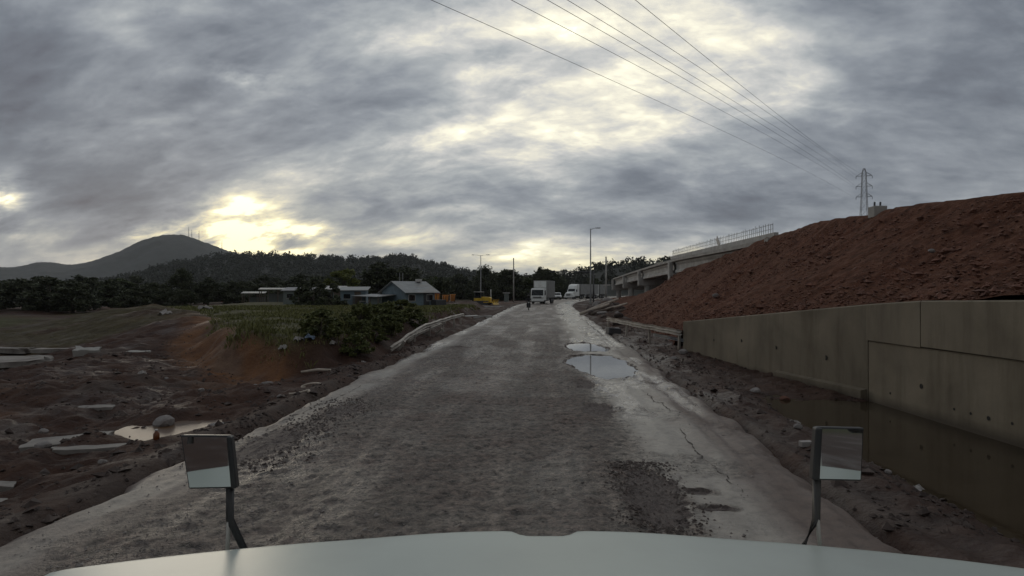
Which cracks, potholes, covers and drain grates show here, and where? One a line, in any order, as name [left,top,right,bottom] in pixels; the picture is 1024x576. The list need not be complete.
pothole [697,504,735,512]
pothole [564,342,610,352]
pothole [562,354,639,380]
crack [643,391,743,492]
